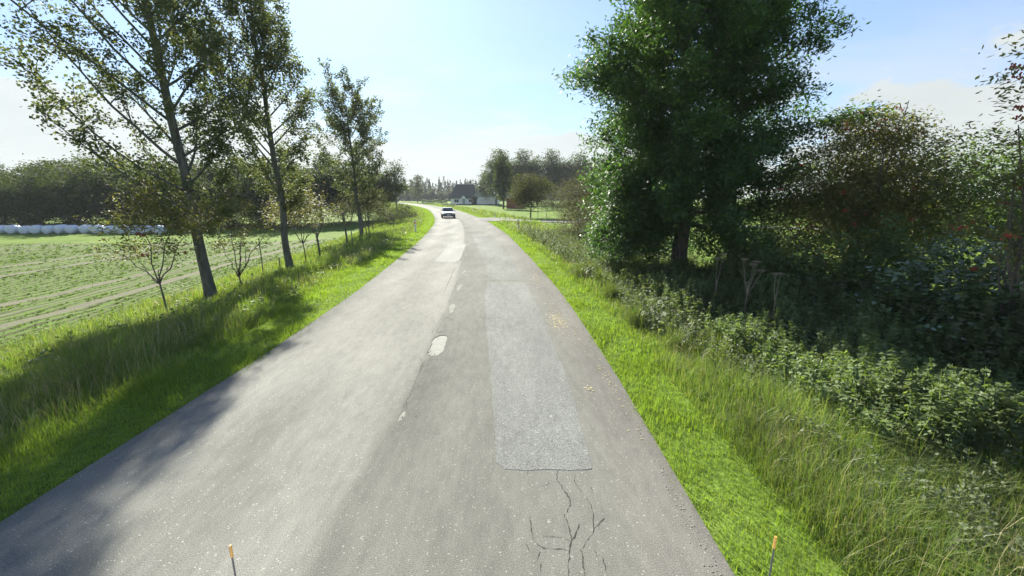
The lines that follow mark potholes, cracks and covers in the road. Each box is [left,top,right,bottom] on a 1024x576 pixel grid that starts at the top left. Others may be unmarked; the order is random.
crack [526,472,606,576]
pothole [427,335,448,356]
